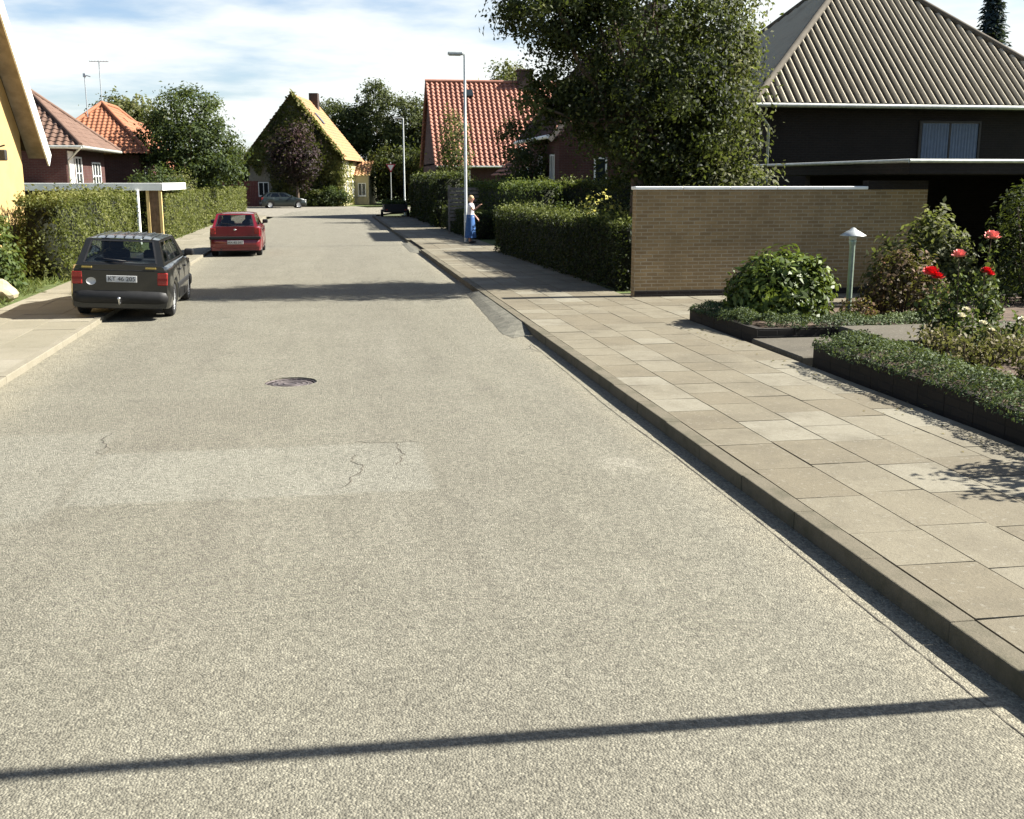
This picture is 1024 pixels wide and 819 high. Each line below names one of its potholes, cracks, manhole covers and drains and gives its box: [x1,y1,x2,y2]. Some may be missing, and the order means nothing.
manhole cover [265,378,316,387]
crack [95,433,112,455]
crack [340,441,418,489]
